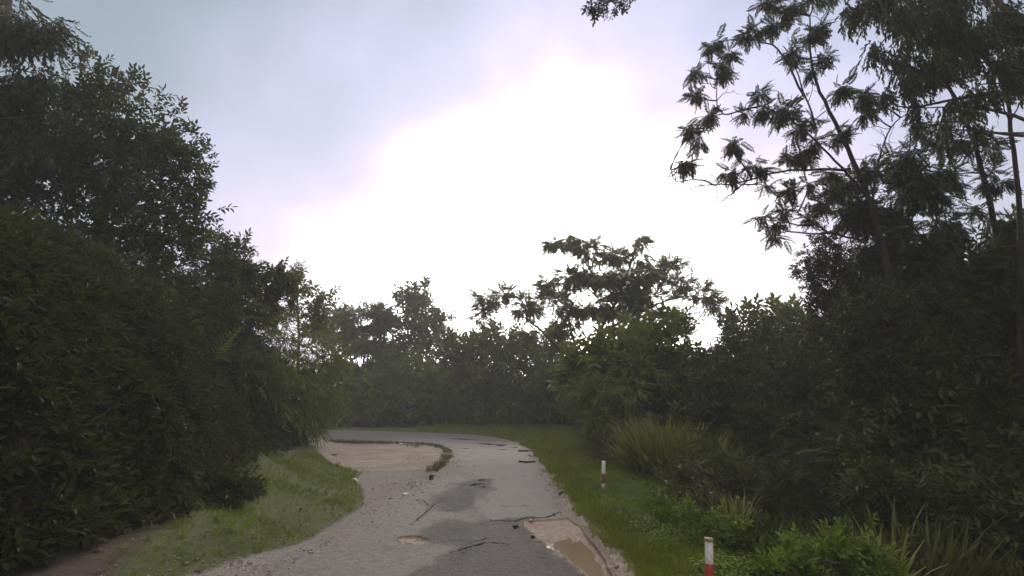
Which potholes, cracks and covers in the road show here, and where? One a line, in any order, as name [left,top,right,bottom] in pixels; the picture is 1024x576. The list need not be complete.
crack [452,512,559,552]
pothole [523,517,613,576]
pothole [397,535,429,545]
